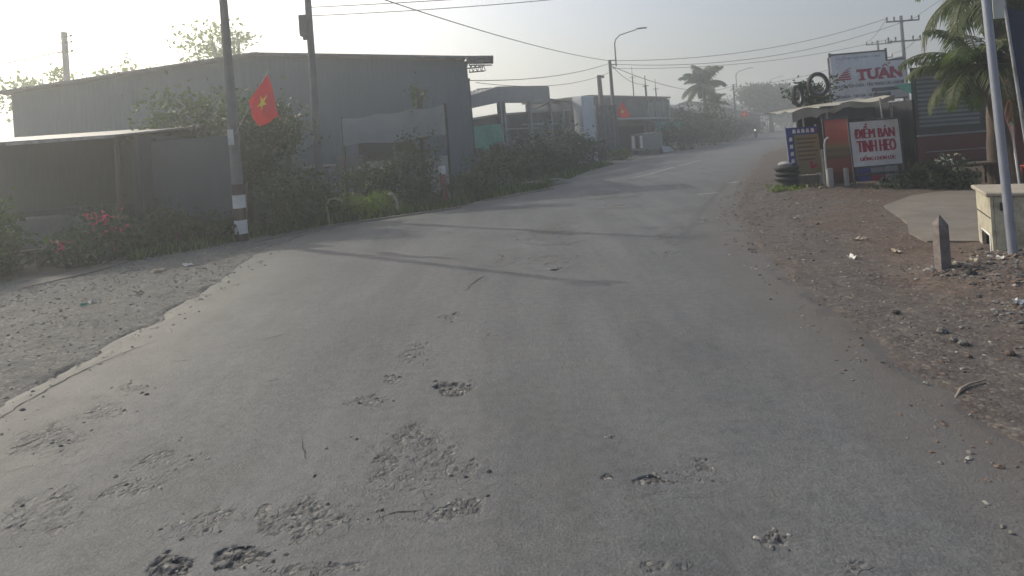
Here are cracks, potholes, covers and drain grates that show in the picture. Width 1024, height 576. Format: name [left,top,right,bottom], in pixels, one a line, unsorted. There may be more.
pothole [738,520,810,561]
pothole [187,534,296,576]
pothole [422,377,488,403]
pothole [619,467,693,495]
pothole [129,548,216,576]
pothole [38,433,85,450]
